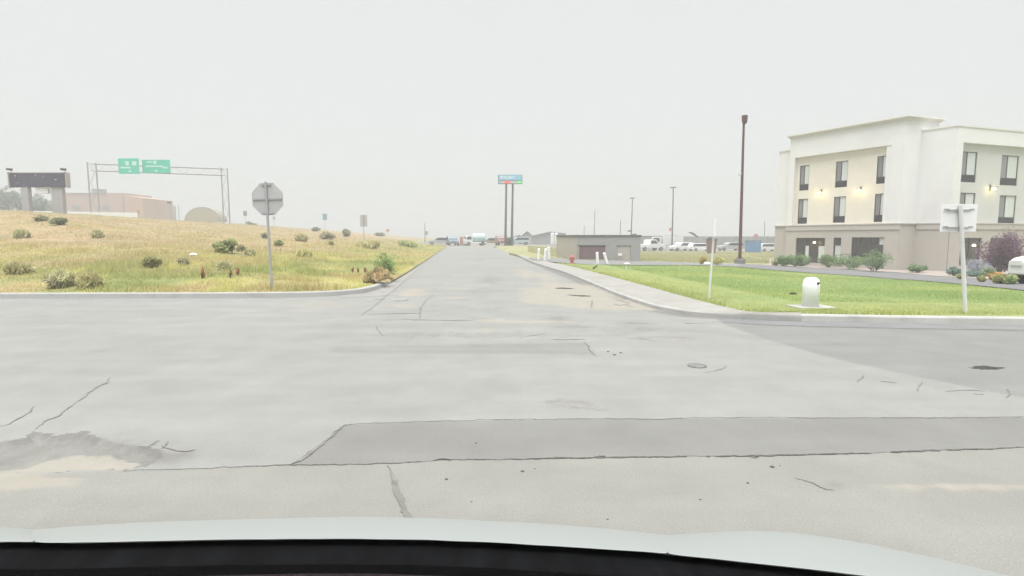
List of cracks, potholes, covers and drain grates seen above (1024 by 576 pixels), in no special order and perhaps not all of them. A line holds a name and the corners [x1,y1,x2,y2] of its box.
crack [387,465,412,518]
crack [2,379,109,428]
crack [368,294,461,335]
